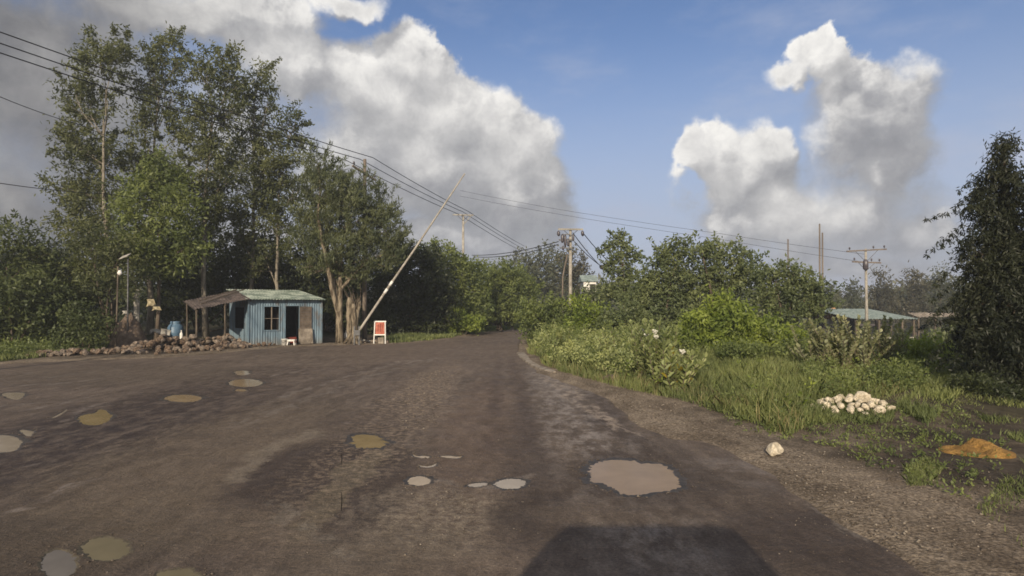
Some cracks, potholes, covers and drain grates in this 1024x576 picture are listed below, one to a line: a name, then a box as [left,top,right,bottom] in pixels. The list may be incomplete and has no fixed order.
pothole [489,477,531,491]
pothole [160,394,210,403]
pothole [76,535,134,562]
pothole [36,548,80,576]
pothole [578,457,688,497]
pothole [151,567,205,576]
pothole [0,392,32,400]
pothole [343,433,397,450]
pothole [0,434,34,454]
pothole [402,475,437,486]
pothole [226,378,267,387]
pothole [73,409,118,426]
